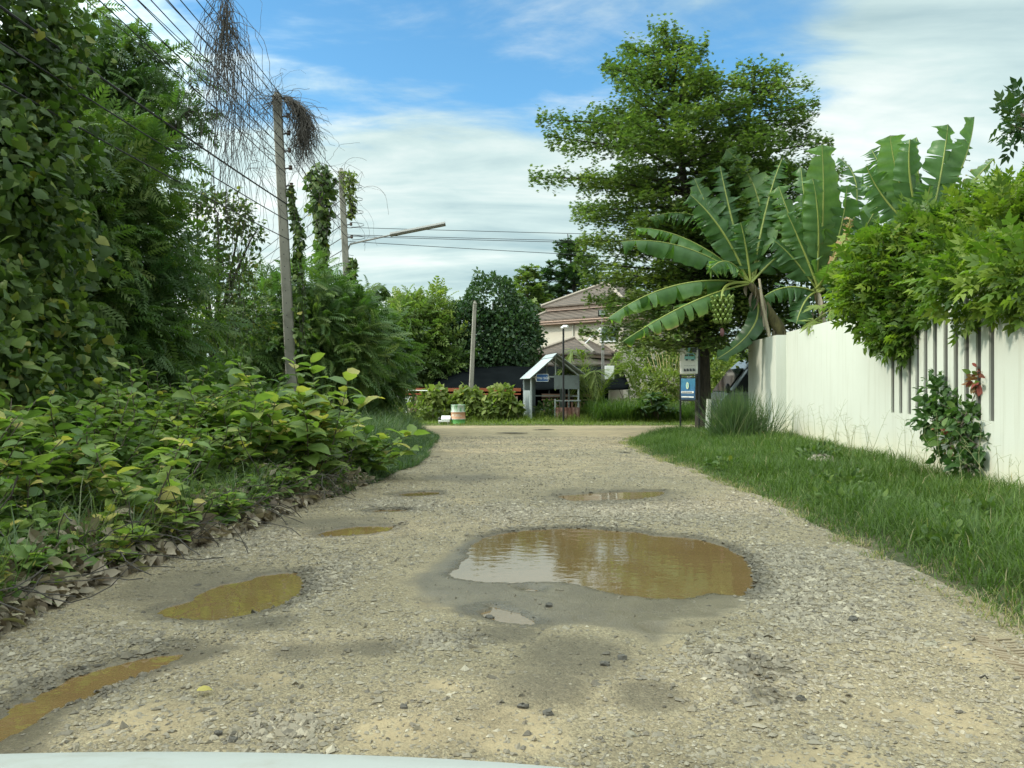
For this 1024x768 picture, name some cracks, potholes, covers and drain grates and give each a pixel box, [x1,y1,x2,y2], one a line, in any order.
pothole [418,521,792,607]
pothole [294,518,417,538]
pothole [348,504,430,514]
pothole [0,633,234,754]
pothole [378,488,460,499]
pothole [121,564,335,627]
pothole [541,486,684,502]
